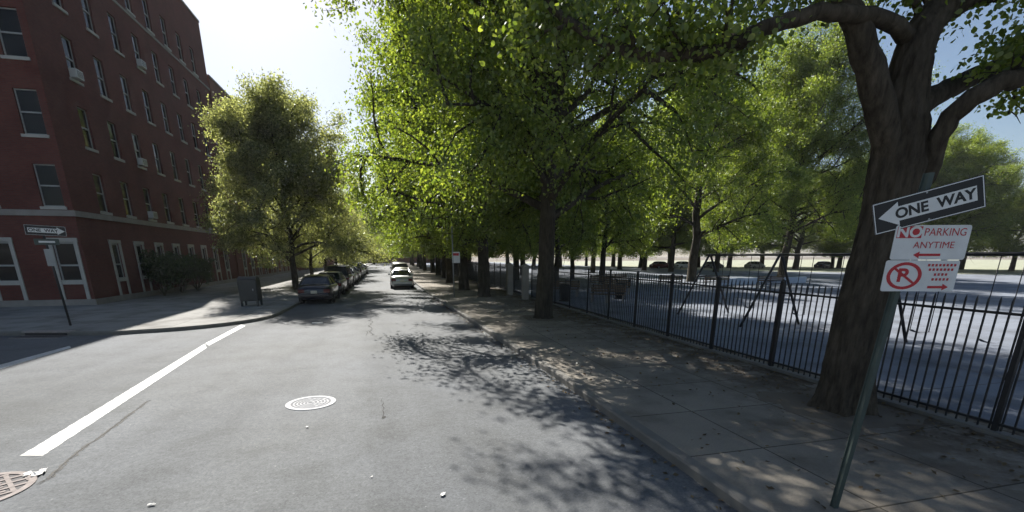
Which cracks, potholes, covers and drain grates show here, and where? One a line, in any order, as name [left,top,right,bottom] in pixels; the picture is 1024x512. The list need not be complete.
manhole cover [285,396,336,411]
